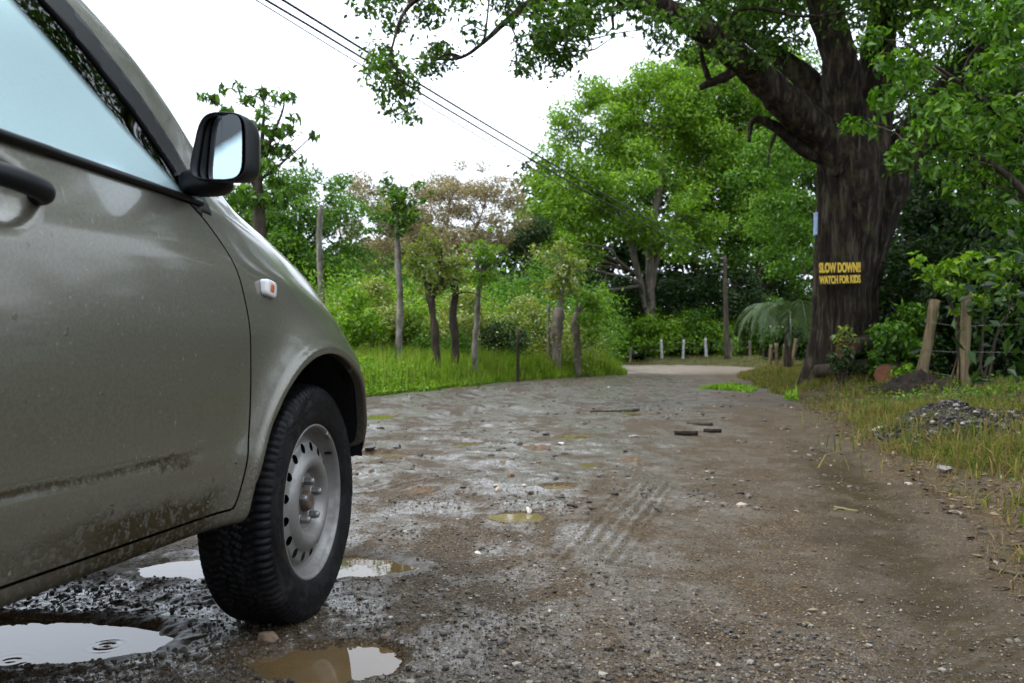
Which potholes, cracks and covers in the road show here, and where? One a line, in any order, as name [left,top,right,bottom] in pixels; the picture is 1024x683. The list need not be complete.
pothole [227,637,417,683]
pothole [0,608,253,669]
pothole [538,481,579,489]
pothole [482,510,551,525]
pothole [102,549,445,582]
